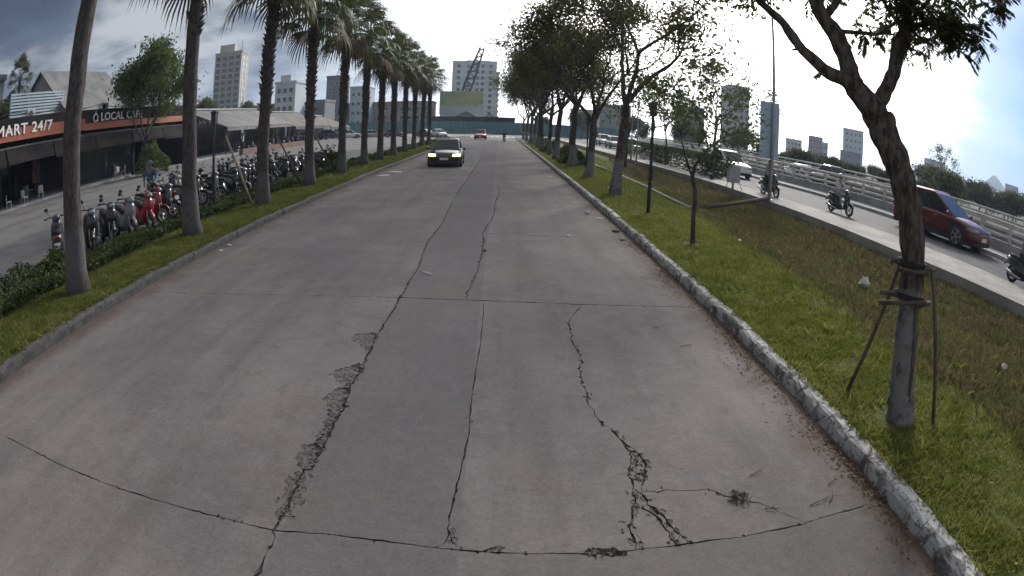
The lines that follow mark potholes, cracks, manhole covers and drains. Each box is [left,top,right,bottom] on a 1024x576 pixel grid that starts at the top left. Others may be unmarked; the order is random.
crack [436,189,500,548]
crack [566,305,797,550]
crack [253,138,485,576]
